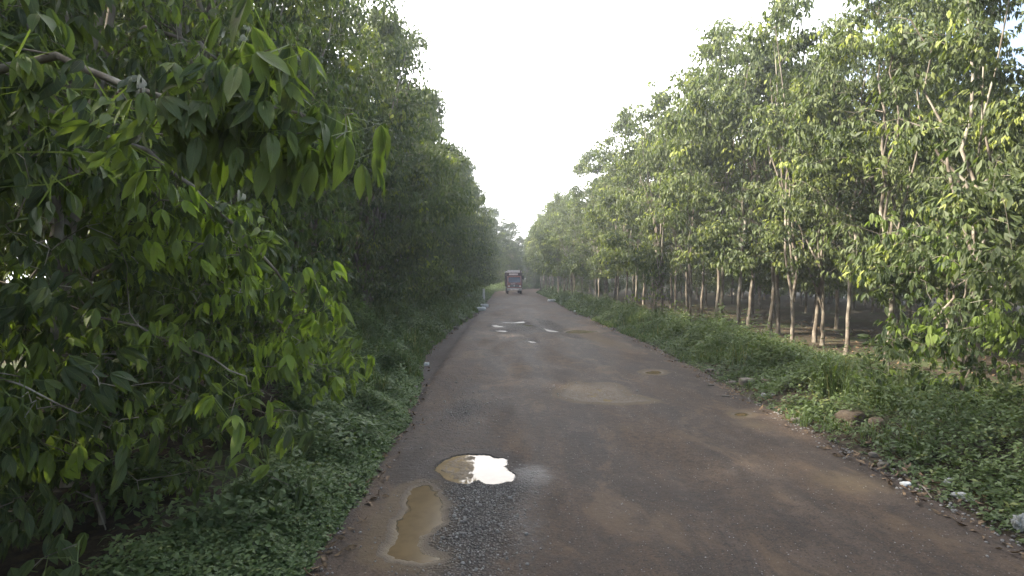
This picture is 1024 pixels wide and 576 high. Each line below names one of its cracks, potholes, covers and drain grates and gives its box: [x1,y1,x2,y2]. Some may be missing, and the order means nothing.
pothole [376,483,451,567]
pothole [433,453,516,484]
